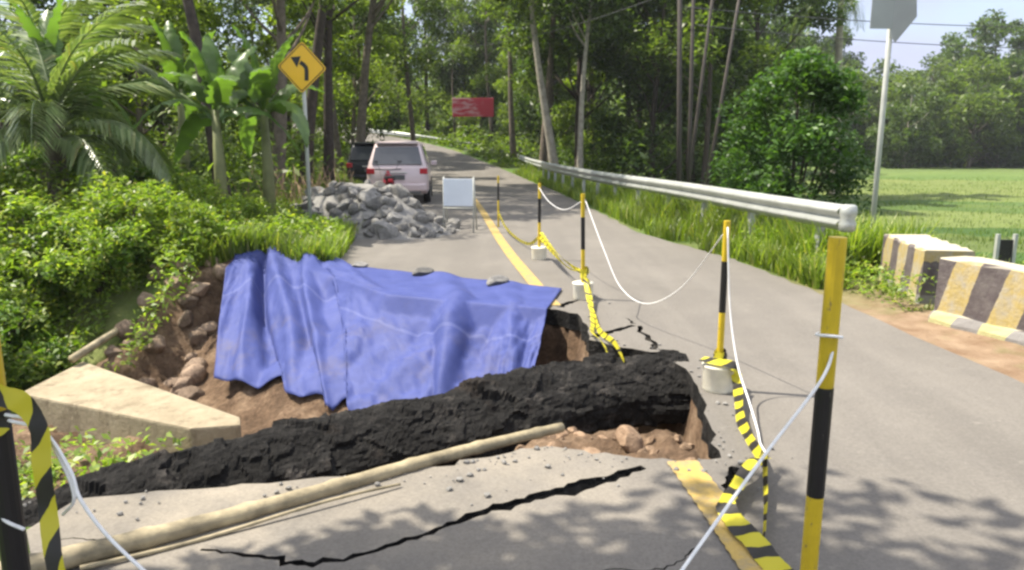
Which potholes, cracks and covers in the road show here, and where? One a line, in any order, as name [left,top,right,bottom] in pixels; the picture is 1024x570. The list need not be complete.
pothole [11,251,710,498]
crack [597,323,657,350]
crack [279,470,640,568]
